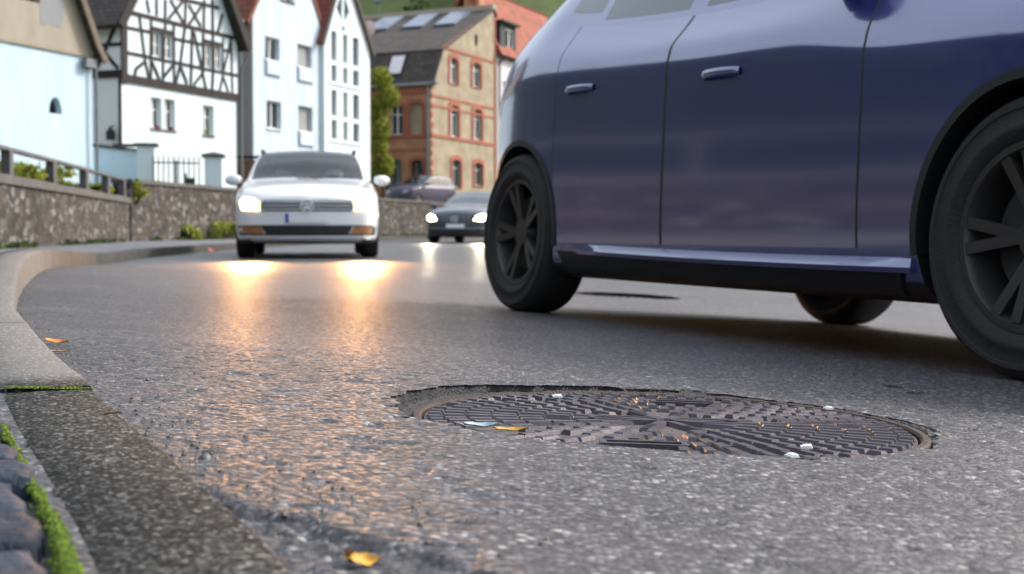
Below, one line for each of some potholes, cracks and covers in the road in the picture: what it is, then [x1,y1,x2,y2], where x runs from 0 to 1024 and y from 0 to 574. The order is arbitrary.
manhole cover [390,384,941,460]
